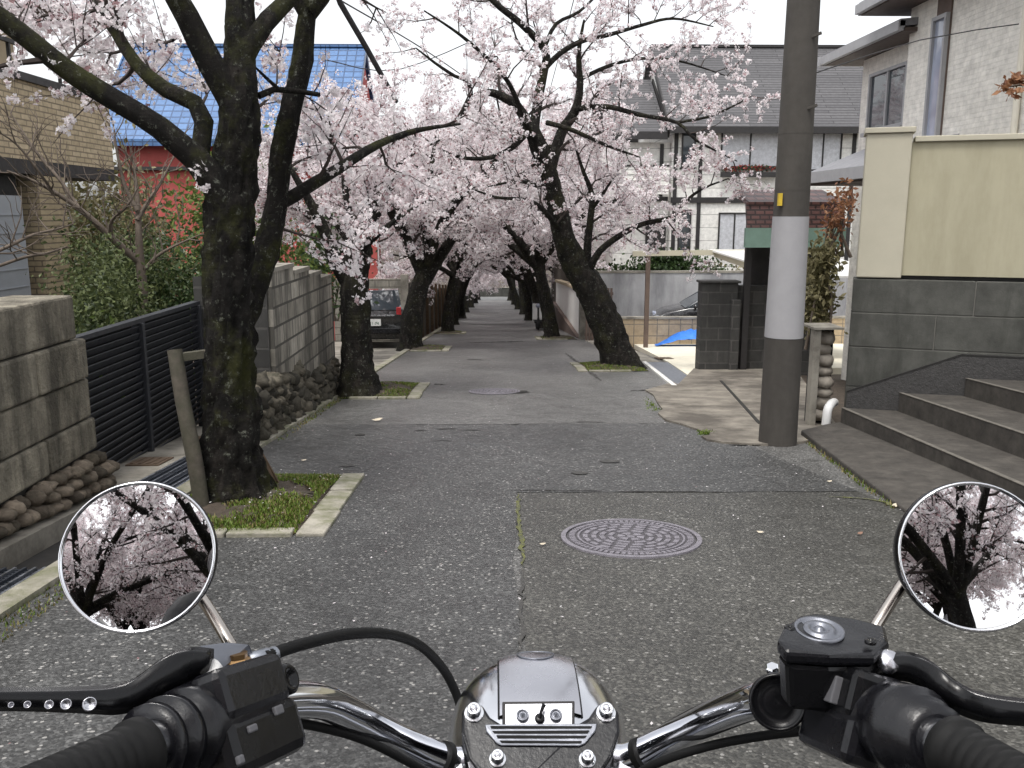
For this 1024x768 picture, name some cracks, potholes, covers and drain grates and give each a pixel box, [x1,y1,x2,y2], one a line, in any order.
crack [515,493,526,652]
drain grate [154,457,188,474]
drain grate [0,567,45,595]
manhole cover [561,519,702,559]
